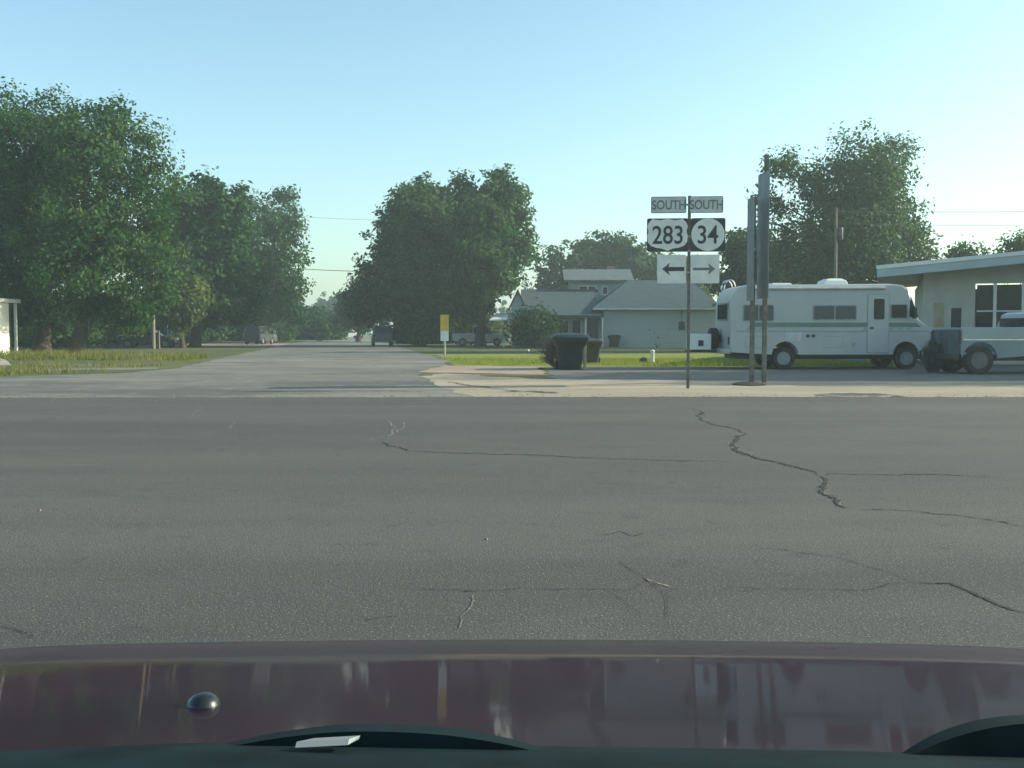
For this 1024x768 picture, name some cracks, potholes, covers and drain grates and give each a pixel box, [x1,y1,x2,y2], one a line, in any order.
crack [445,588,597,630]
crack [755,548,1023,612]
crack [609,563,676,618]
crack [369,407,1016,525]
